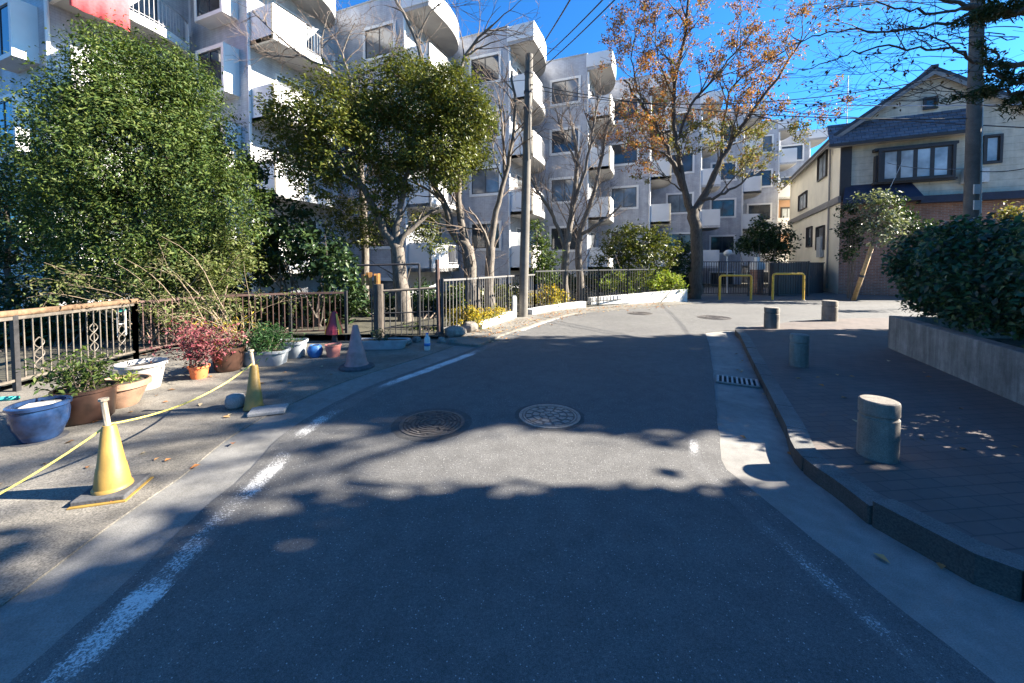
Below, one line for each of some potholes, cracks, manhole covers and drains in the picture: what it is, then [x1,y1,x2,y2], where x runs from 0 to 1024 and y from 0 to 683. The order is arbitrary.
drain grate [716,374,761,389]
manhole cover [391,408,473,442]
manhole cover [515,403,584,431]
